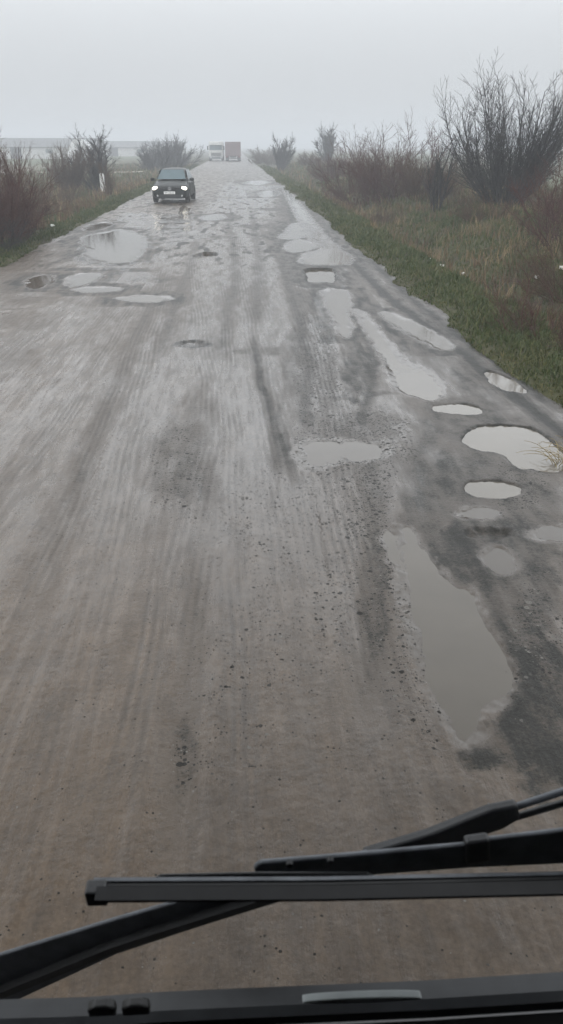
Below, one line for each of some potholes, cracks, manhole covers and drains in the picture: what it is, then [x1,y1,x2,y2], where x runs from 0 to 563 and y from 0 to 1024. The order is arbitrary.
pothole [300,267,341,284]
pothole [78,229,150,264]
pothole [454,422,563,475]
pothole [456,477,531,501]
pothole [318,287,359,339]
pothole [69,285,125,293]
pothole [20,274,58,290]
pothole [351,308,451,402]
pothole [113,294,177,304]
pothole [170,339,214,349]
pothole [287,437,396,474]
pothole [520,522,563,544]
